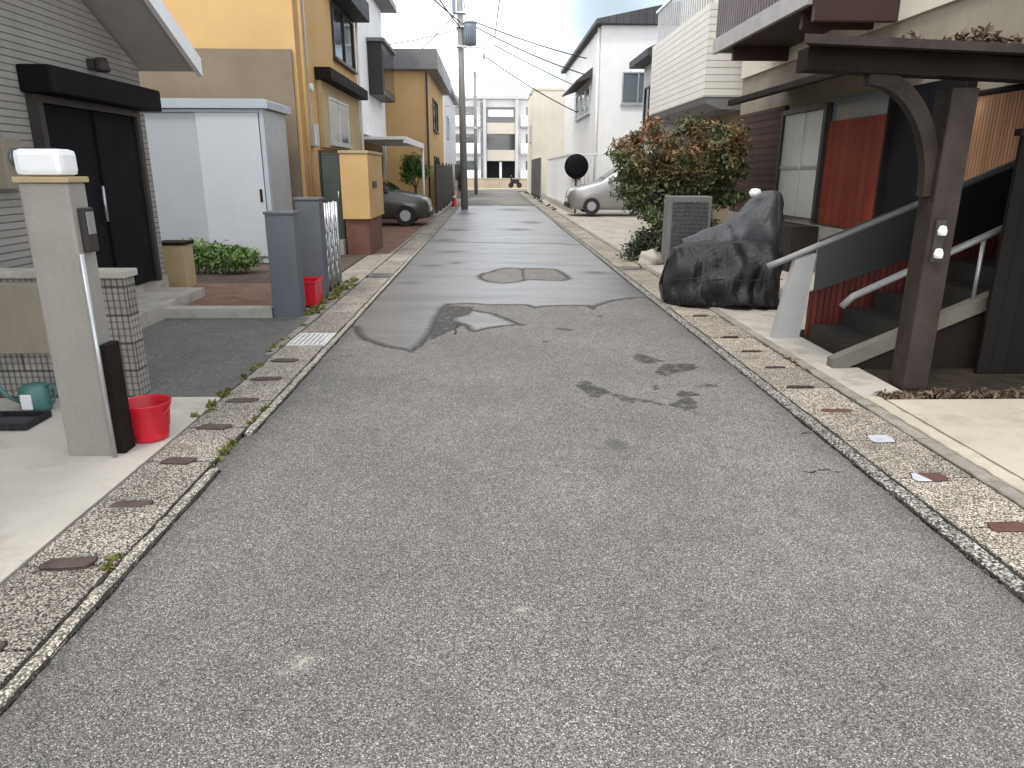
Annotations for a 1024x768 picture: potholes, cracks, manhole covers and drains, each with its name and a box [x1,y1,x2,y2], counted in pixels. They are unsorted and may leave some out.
drain grate [285,333,337,346]
